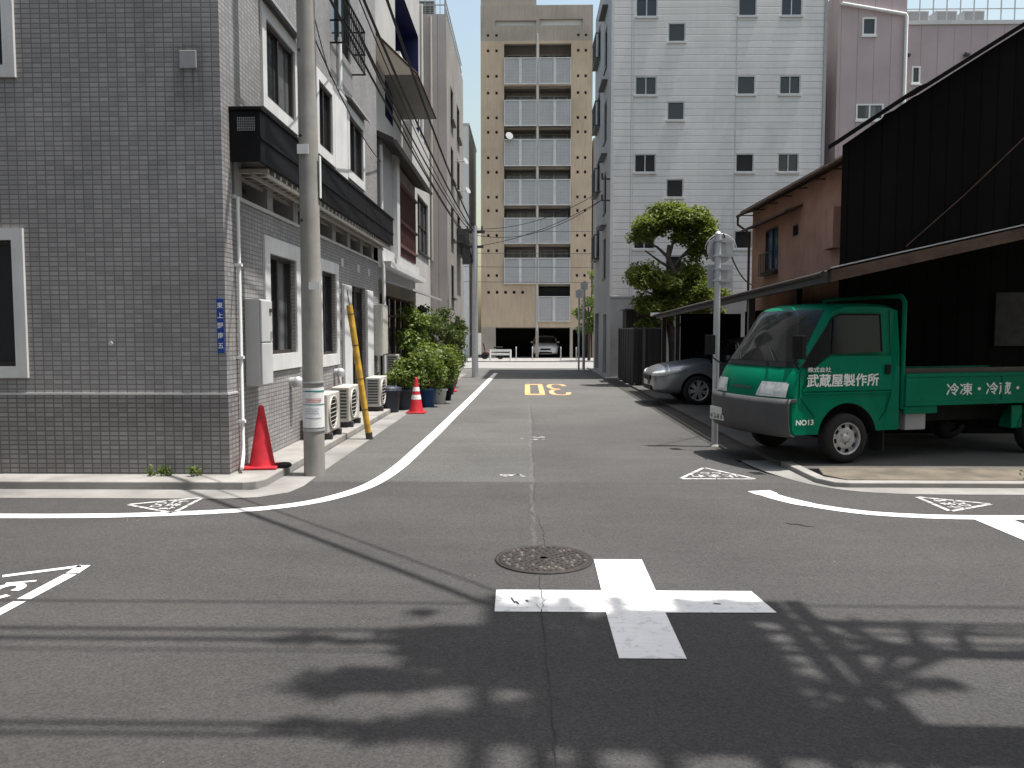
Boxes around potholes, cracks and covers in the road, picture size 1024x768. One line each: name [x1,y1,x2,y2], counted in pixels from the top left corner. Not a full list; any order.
crack [536,576,556,764]
manhole cover [495,545,593,575]
